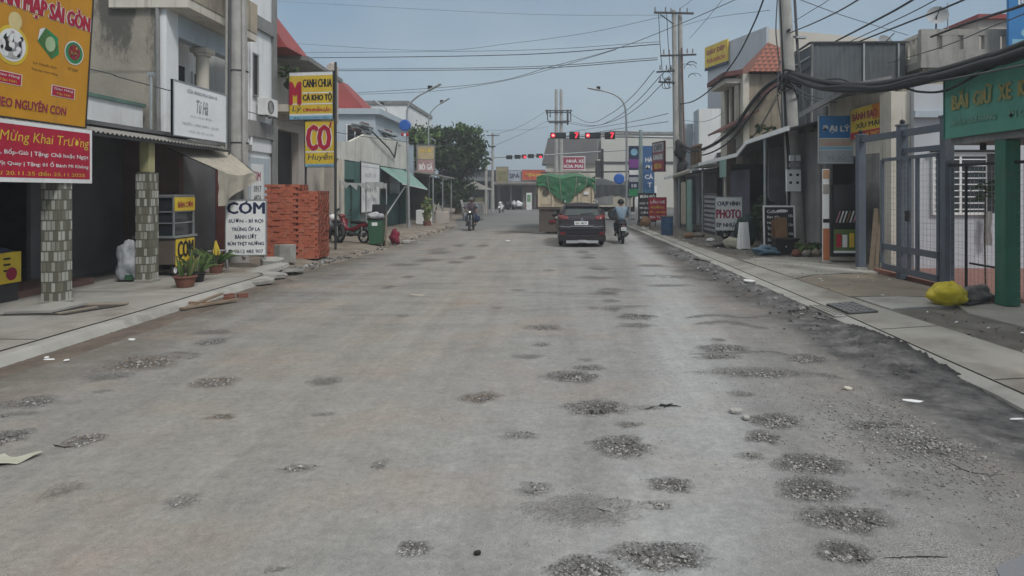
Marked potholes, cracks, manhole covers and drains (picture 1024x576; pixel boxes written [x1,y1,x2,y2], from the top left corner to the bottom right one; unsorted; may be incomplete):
pothole [185,376,243,389]
pothole [583,434,660,461]
pothole [811,538,880,567]
pothole [741,411,807,430]
pothole [772,474,860,505]
pothole [538,370,604,384]
pothole [456,391,507,406]
drain grate [826,301,878,315]
pothole [767,452,855,477]
pothole [644,476,697,494]
pothole [557,398,639,418]
pothole [59,433,110,449]
